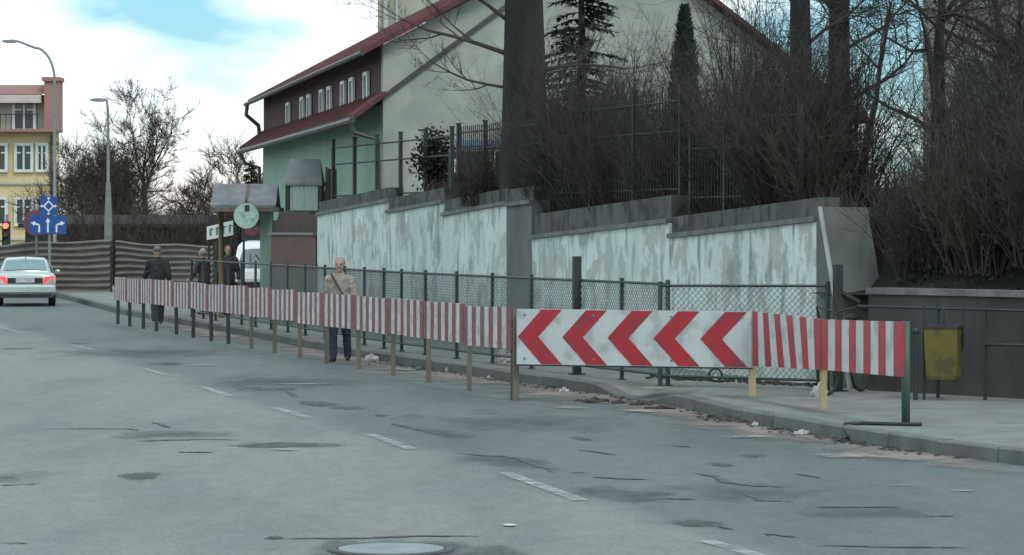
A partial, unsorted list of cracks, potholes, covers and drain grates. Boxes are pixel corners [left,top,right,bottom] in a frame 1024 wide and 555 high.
manhole cover [328,542,454,555]
crack [463,453,552,472]
crack [391,423,446,435]
crack [66,422,233,452]
crack [667,473,821,502]
